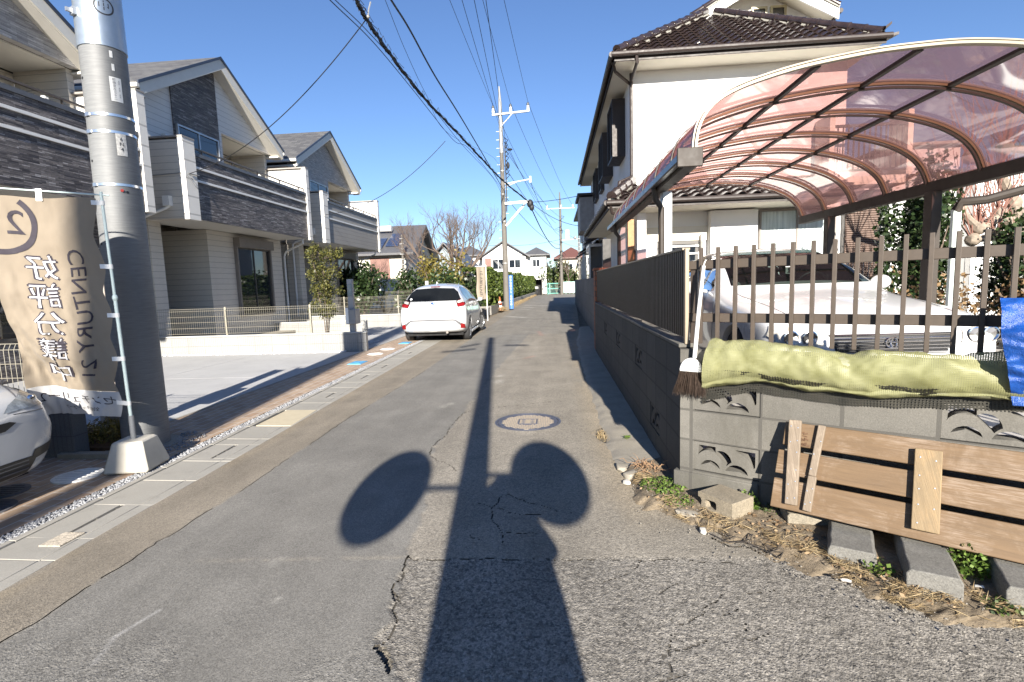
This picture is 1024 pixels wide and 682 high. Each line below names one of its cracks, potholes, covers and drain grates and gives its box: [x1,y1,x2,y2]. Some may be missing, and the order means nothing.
crack [429,411,469,471]
manhole cover [495,413,561,431]
crack [375,494,775,651]
utility cover [50,467,104,484]
